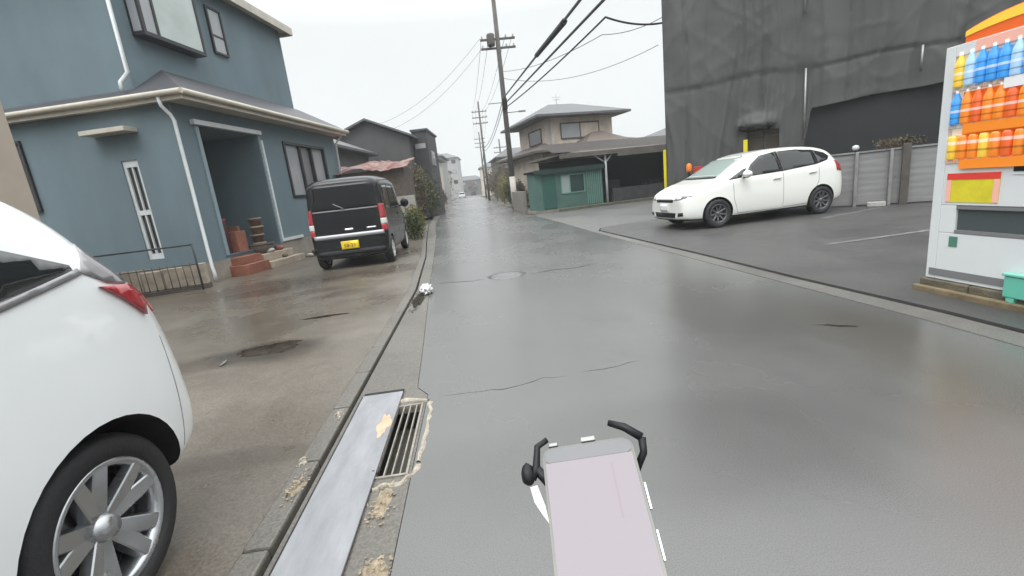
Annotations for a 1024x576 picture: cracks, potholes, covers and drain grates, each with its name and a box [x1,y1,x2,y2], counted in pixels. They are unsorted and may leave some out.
pothole [236,340,302,357]
manhole cover [487,271,526,280]
crack [446,361,634,396]
drain grate [374,402,424,480]
